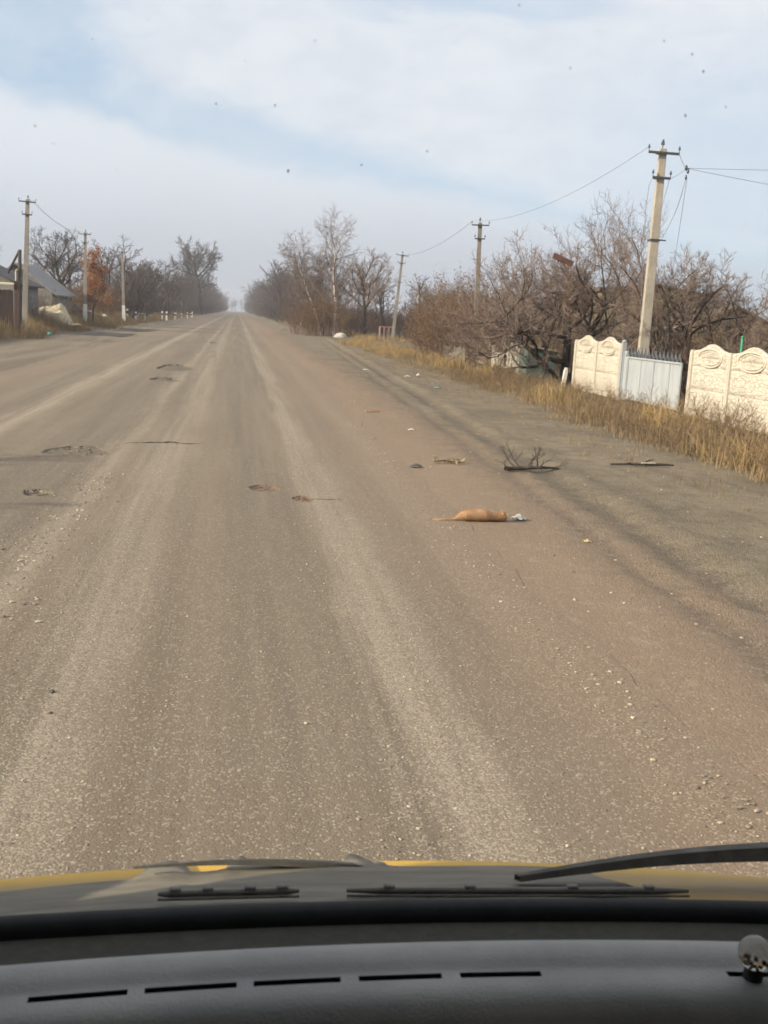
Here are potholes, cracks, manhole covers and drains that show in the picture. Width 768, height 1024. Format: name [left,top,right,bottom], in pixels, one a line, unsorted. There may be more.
pothole [41,446,111,456]
